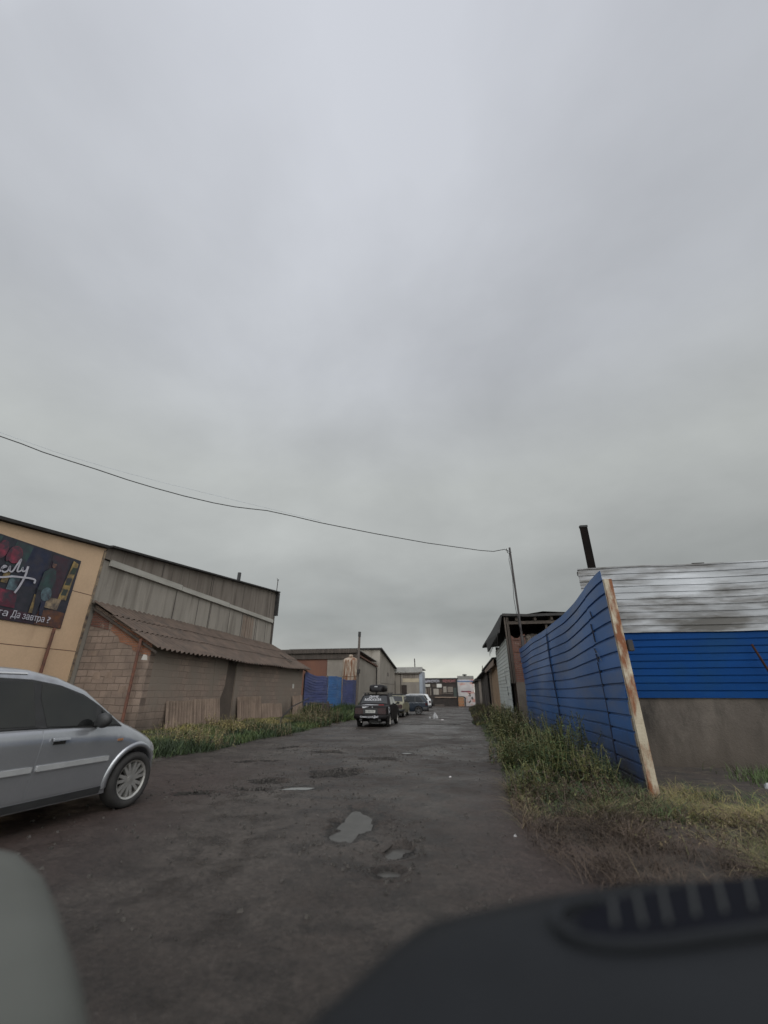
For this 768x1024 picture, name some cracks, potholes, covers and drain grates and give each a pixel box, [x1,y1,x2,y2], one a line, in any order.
pothole [301,767,373,780]
pothole [365,862,413,882]
pothole [243,777,294,785]
pothole [273,785,333,793]
pothole [371,838,421,863]
